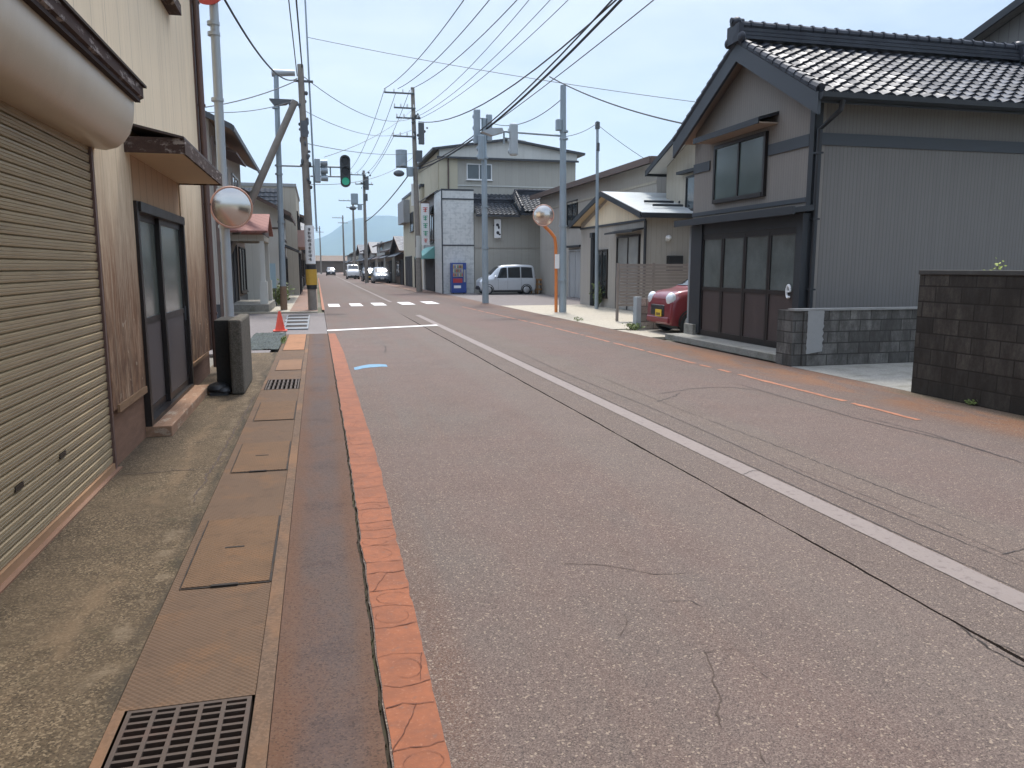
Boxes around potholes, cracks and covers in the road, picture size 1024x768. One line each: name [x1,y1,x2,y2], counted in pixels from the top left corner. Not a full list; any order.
drain grate [265,379,300,390]
crack [704,648,769,728]
drain grate [104,696,253,768]
crack [507,351,1024,590]
